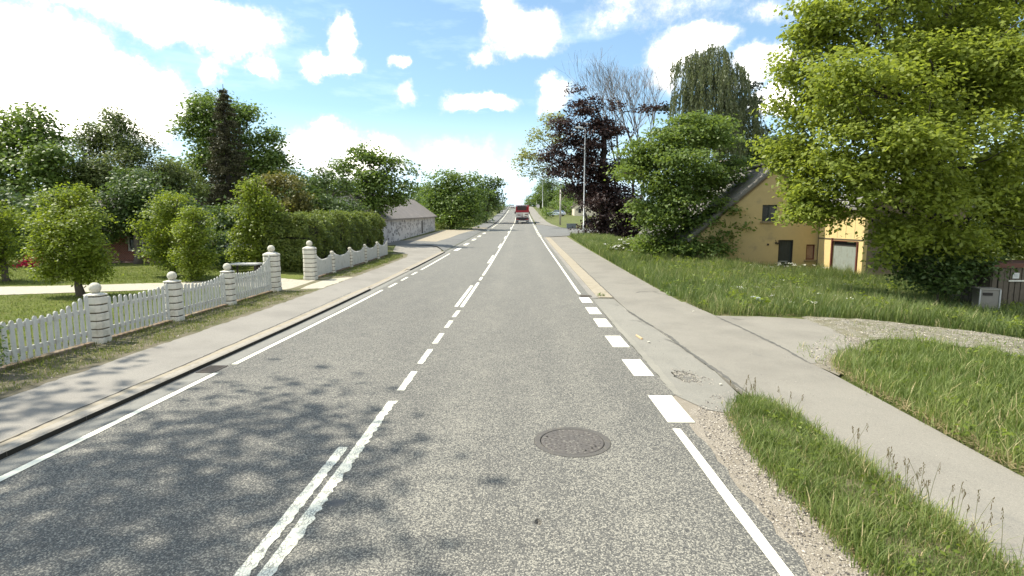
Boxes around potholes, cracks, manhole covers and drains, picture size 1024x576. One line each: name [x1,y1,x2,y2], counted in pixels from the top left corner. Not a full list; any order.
drain grate [195,365,228,373]
pothole [672,370,698,383]
manhole cover [534,427,611,458]
